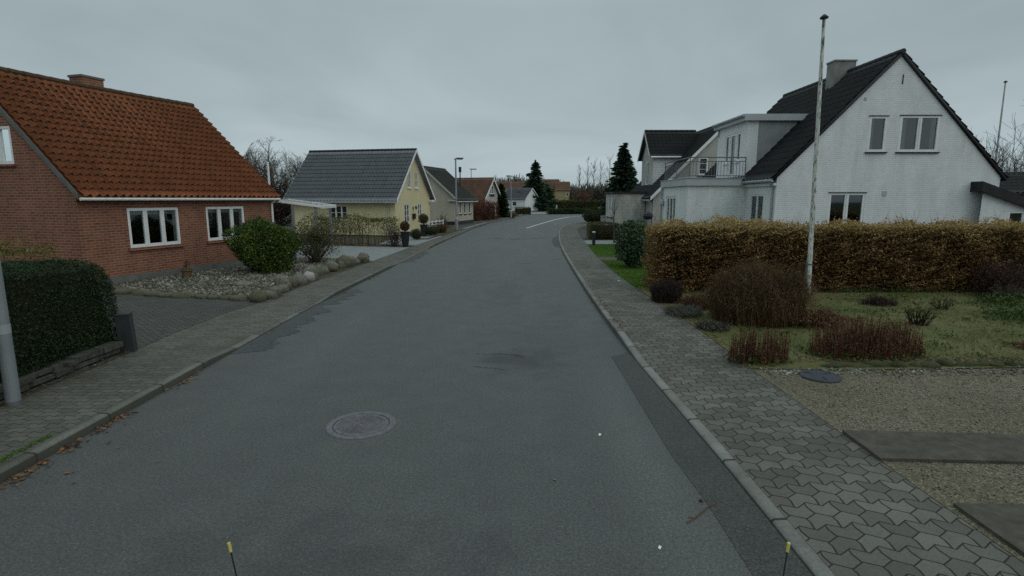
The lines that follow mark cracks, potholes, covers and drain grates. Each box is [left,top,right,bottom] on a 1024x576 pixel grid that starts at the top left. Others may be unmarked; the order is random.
manhole cover [325,411,396,440]
manhole cover [798,369,842,383]
